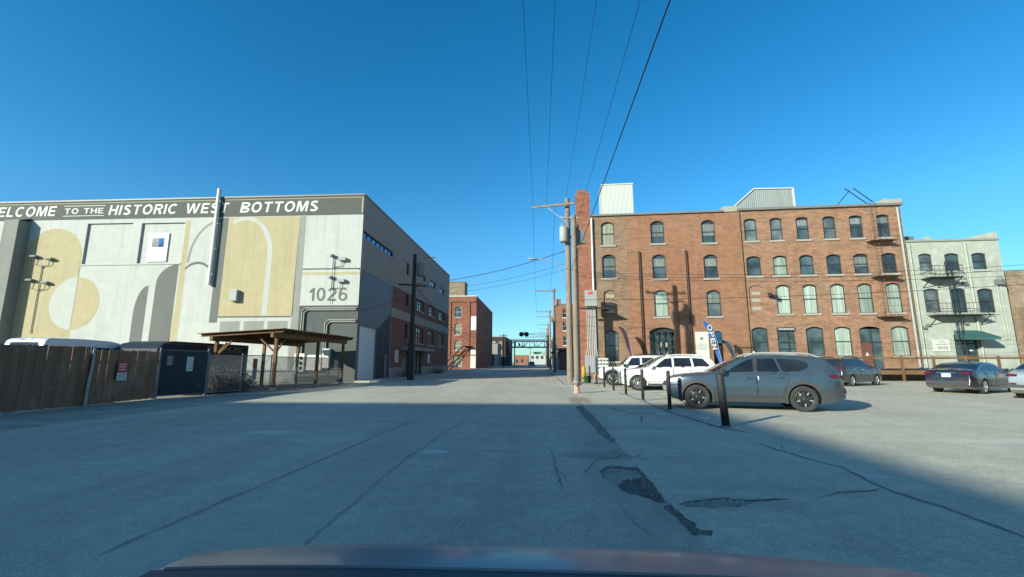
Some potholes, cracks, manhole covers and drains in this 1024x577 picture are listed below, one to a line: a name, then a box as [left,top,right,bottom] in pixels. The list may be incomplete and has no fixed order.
crack [549,406,666,492]
crack [758,442,1024,537]
pothole [600,466,667,503]
crack [616,498,713,536]
pothole [678,497,787,508]
